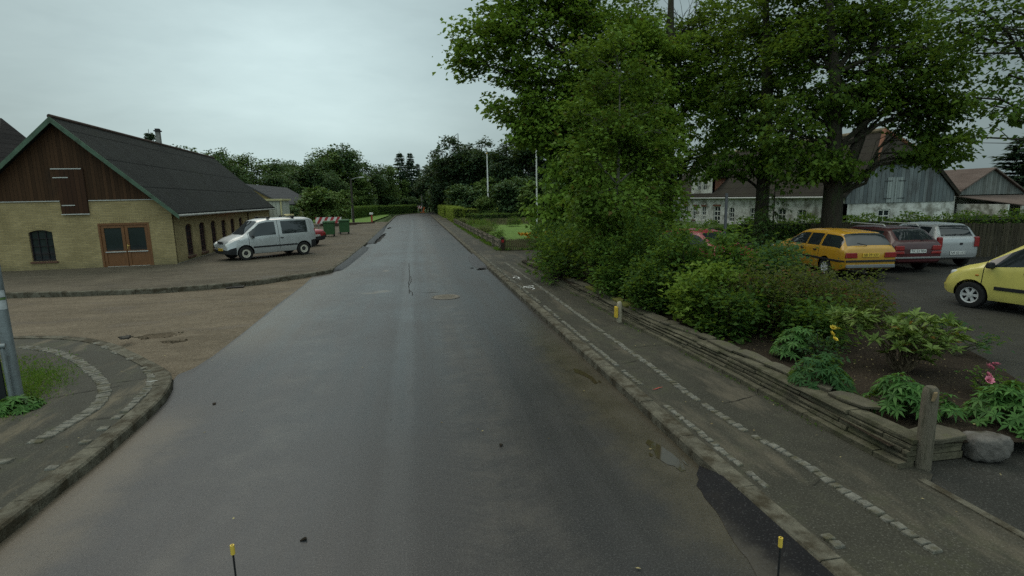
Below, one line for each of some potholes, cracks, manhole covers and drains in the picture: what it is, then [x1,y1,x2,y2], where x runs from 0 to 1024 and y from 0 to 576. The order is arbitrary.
pothole [131,332,184,340]
